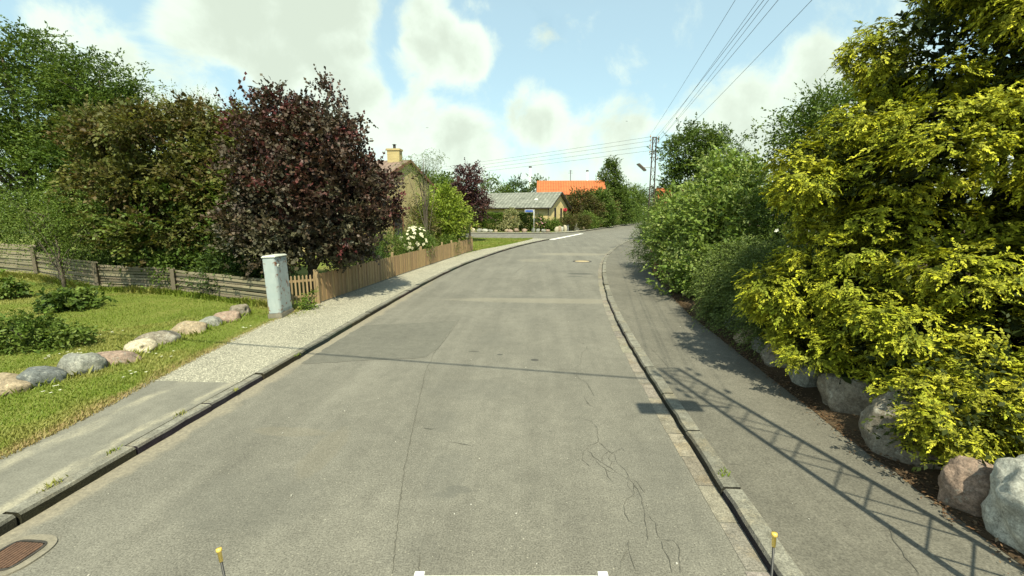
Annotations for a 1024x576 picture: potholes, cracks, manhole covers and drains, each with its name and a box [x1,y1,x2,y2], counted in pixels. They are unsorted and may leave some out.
manhole cover [0,534,58,576]
crack [889,526,919,573]
crack [582,386,681,573]
